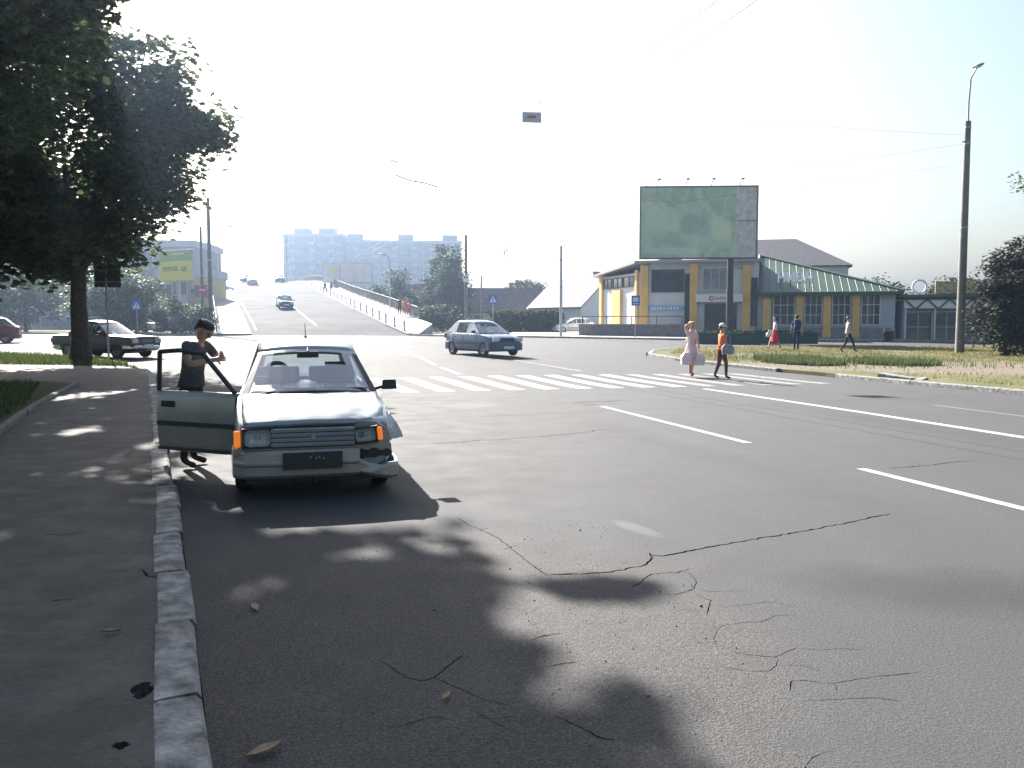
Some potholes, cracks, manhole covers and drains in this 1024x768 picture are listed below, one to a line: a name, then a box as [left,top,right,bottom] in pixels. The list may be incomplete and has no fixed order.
crack [380,654,511,731]
crack [553,715,617,741]
crack [721,647,917,701]
crack [460,514,889,648]
